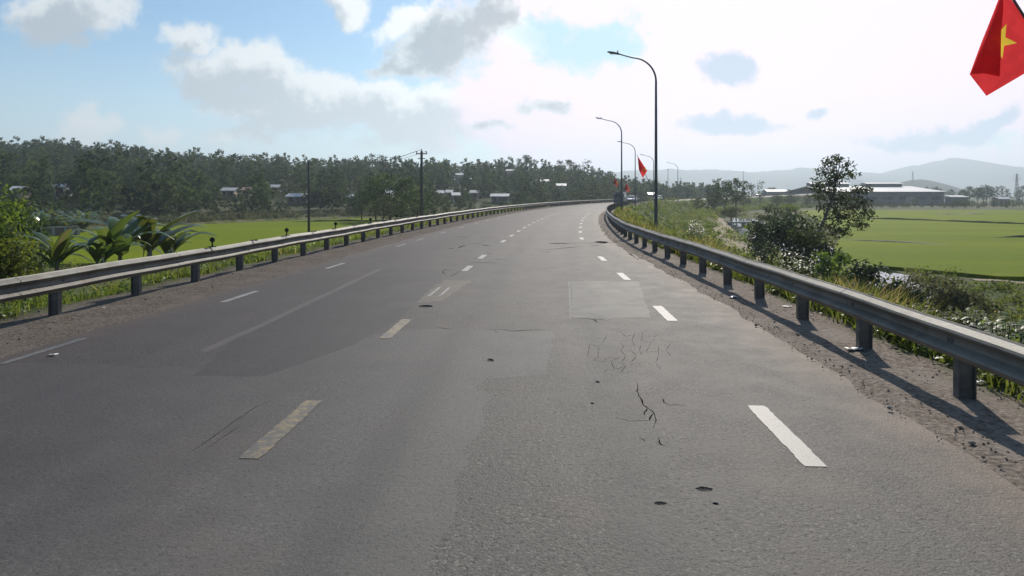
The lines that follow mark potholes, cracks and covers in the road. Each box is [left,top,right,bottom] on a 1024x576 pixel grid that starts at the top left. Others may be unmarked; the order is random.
crack [187,405,260,455]
crack [586,318,687,446]
